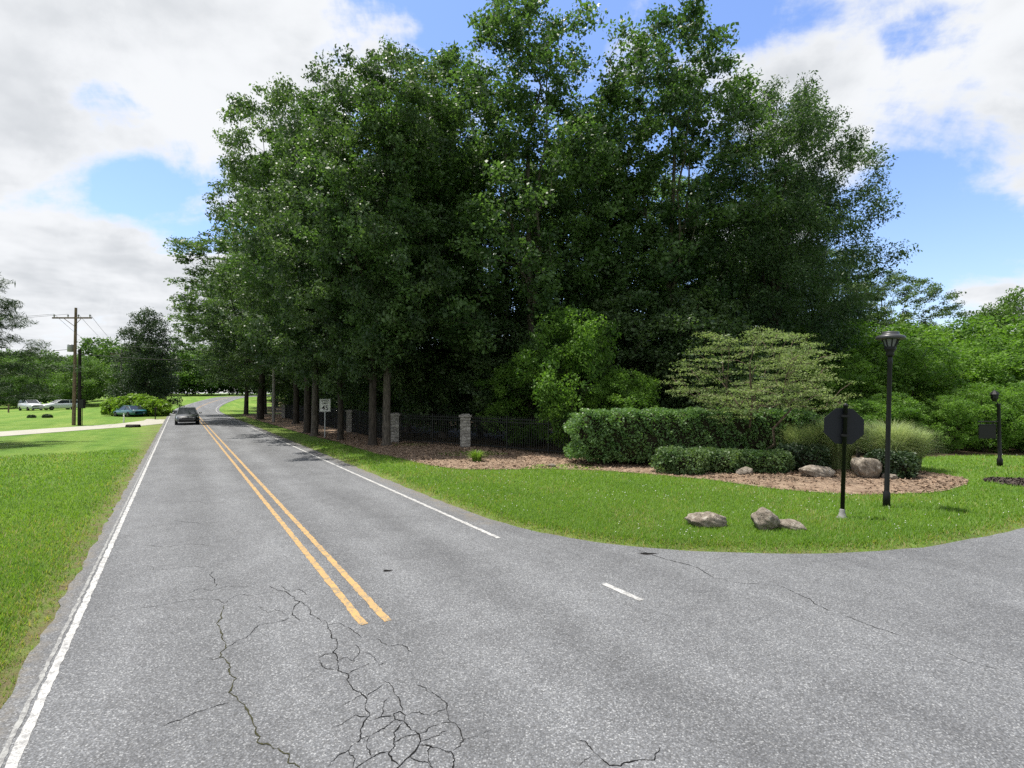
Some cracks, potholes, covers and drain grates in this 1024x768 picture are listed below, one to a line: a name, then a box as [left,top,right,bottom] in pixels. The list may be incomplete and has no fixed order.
crack [576,739,660,766]
crack [109,571,489,768]
